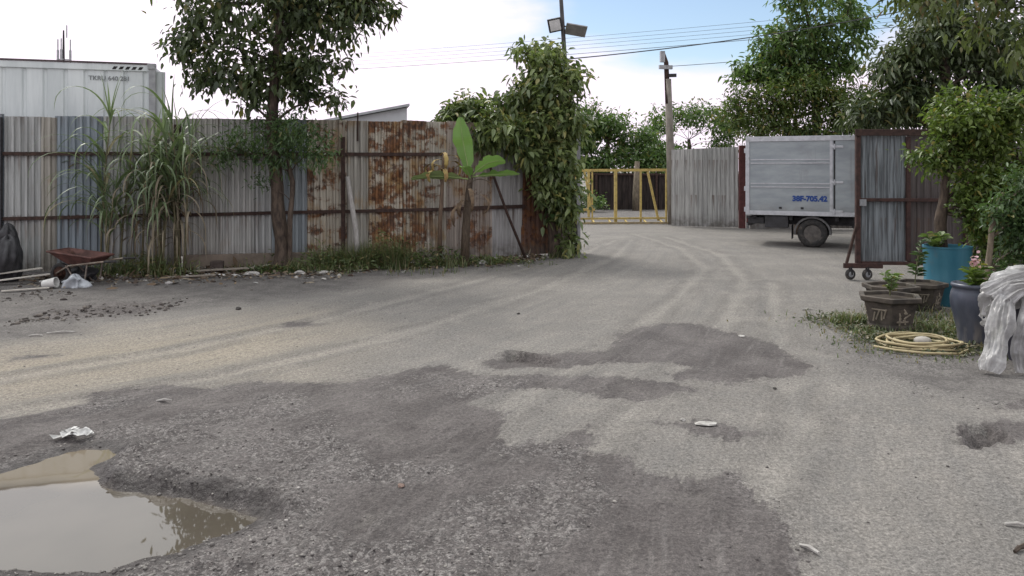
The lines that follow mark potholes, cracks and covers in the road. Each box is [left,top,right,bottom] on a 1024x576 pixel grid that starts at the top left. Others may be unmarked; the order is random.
pothole [0,431,311,576]
pothole [934,420,1024,455]
